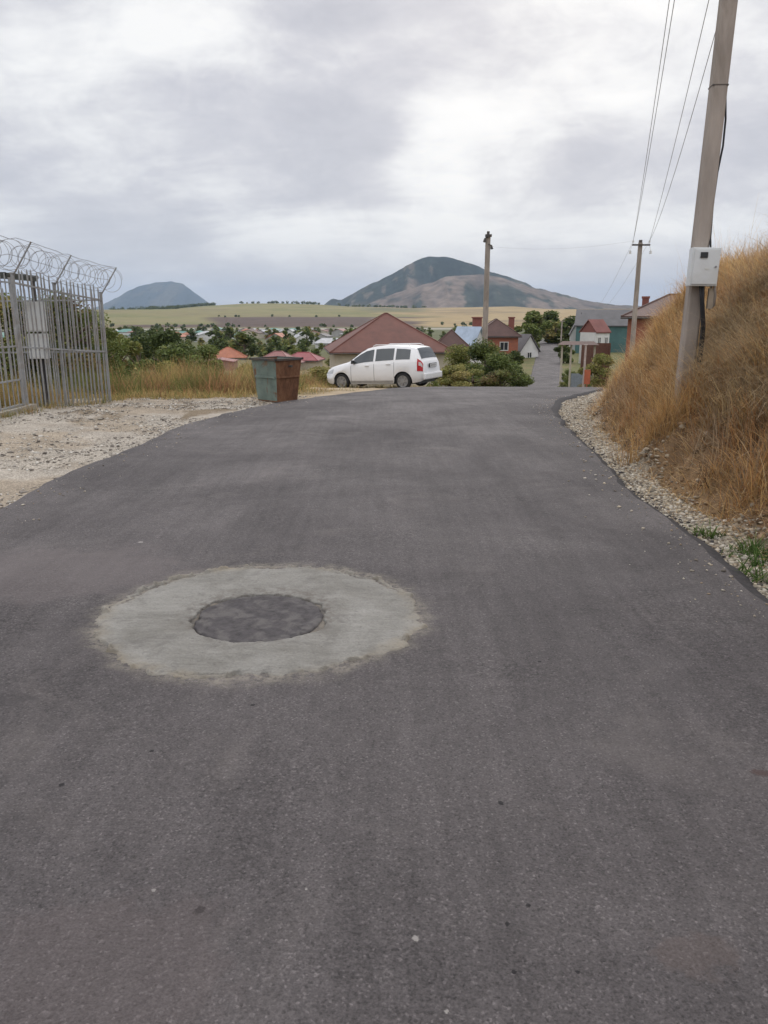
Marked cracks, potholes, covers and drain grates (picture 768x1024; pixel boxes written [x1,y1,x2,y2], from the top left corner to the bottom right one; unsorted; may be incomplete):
manhole cover [190,595,326,643]
